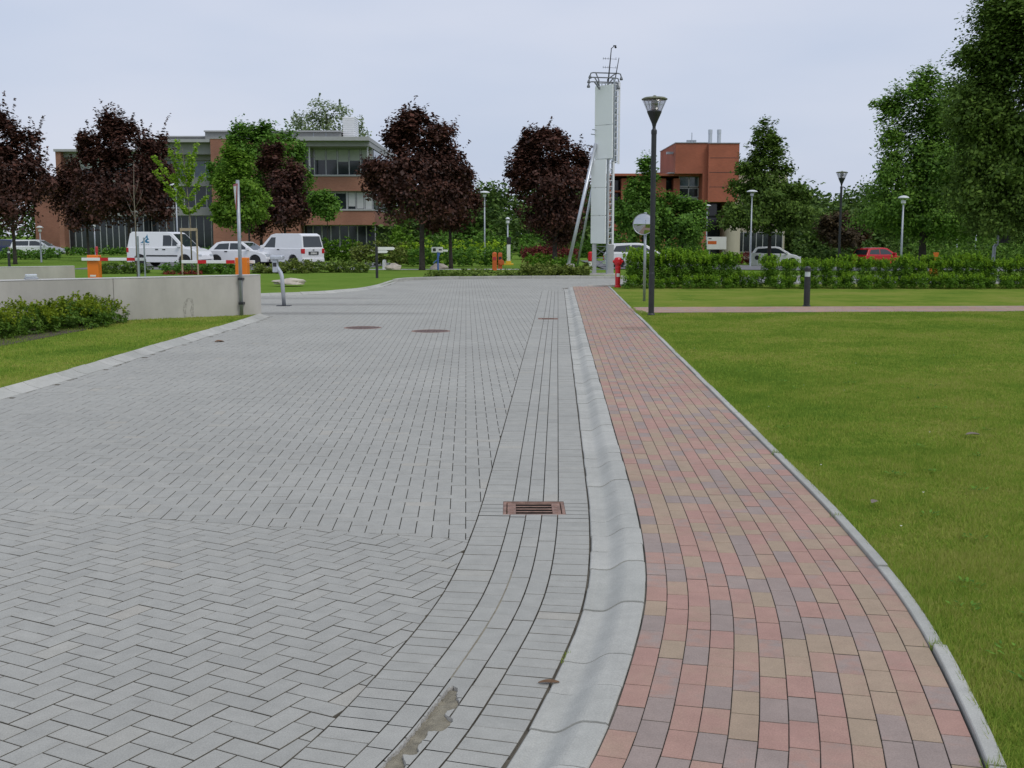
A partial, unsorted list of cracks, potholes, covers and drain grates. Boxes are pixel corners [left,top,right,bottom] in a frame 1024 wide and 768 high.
drain grate [503,502,566,517]
